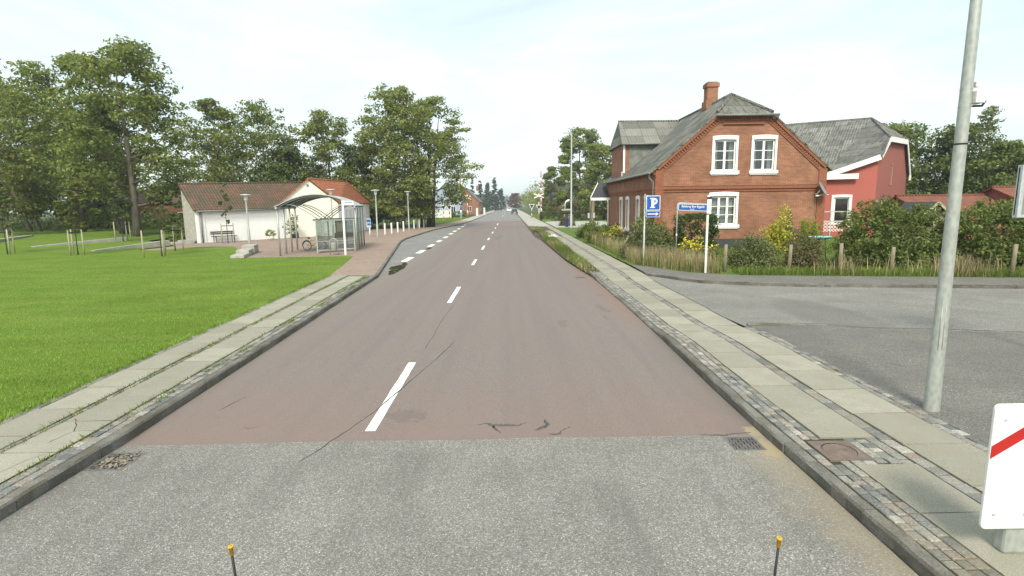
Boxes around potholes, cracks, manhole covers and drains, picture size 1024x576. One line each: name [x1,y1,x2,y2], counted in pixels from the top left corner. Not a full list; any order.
manhole cover [806,440,875,462]
crack [478,420,567,435]
crack [299,307,452,462]
drain grate [723,436,767,451]
pothole [388,262,407,275]
